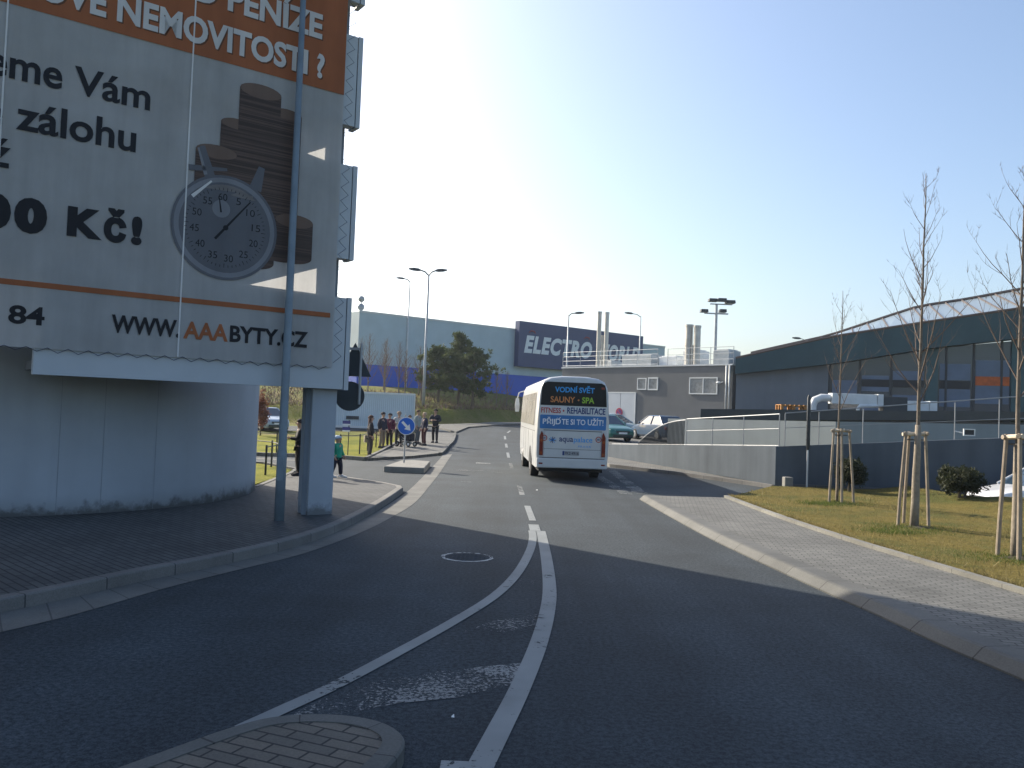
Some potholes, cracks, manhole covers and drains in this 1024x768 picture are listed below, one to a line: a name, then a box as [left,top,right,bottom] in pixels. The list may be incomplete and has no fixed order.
manhole cover [441,552,493,562]
